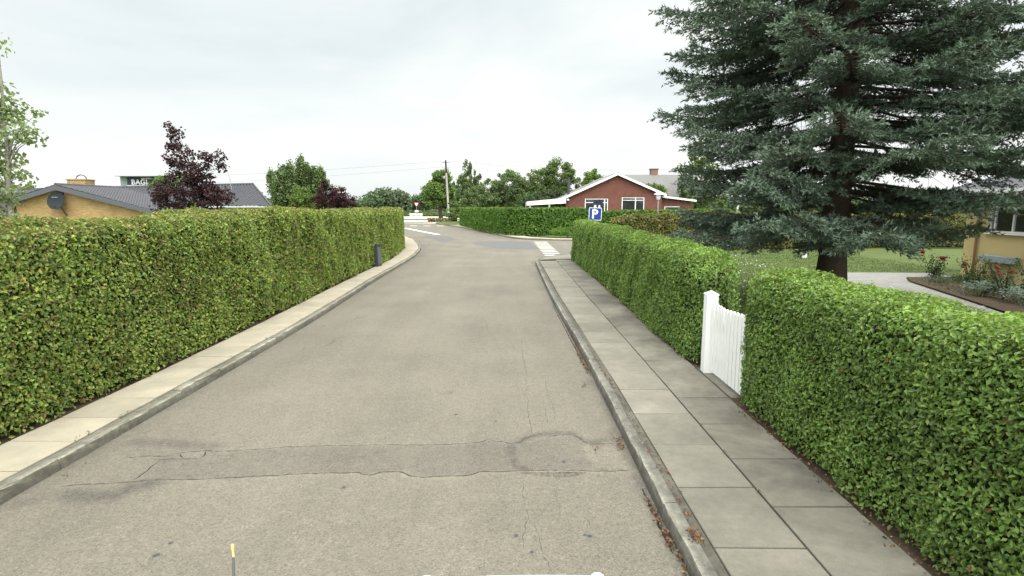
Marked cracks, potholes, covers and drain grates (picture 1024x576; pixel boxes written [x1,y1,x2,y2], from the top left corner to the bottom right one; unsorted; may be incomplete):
crack [61,340,634,575]
